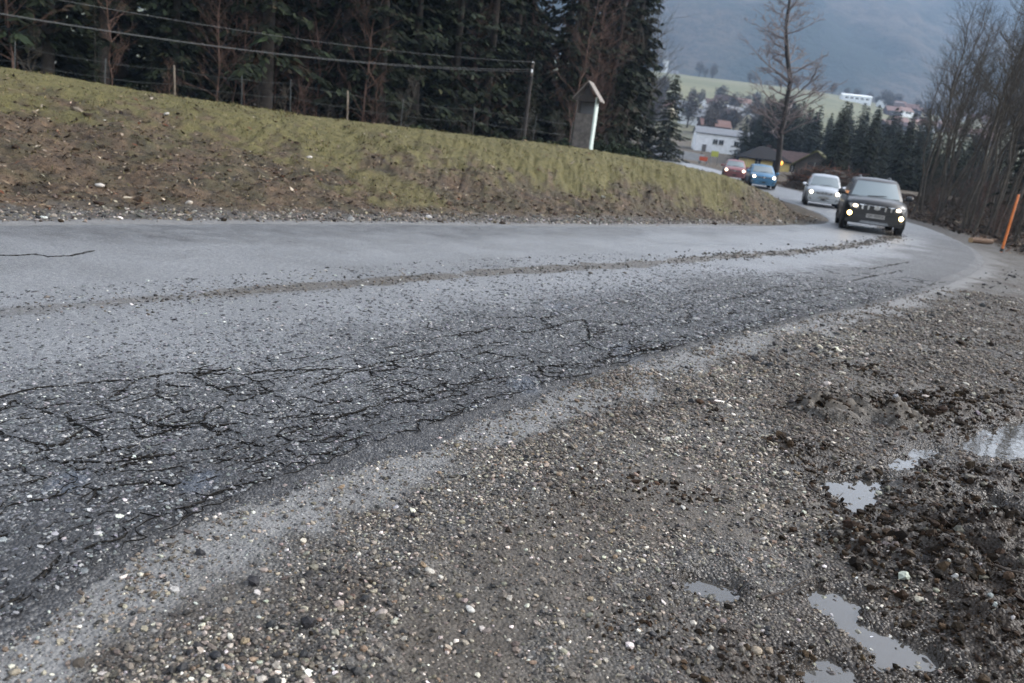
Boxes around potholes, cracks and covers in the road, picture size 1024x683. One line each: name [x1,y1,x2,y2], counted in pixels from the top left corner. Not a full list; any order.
crack [0,322,574,609]
